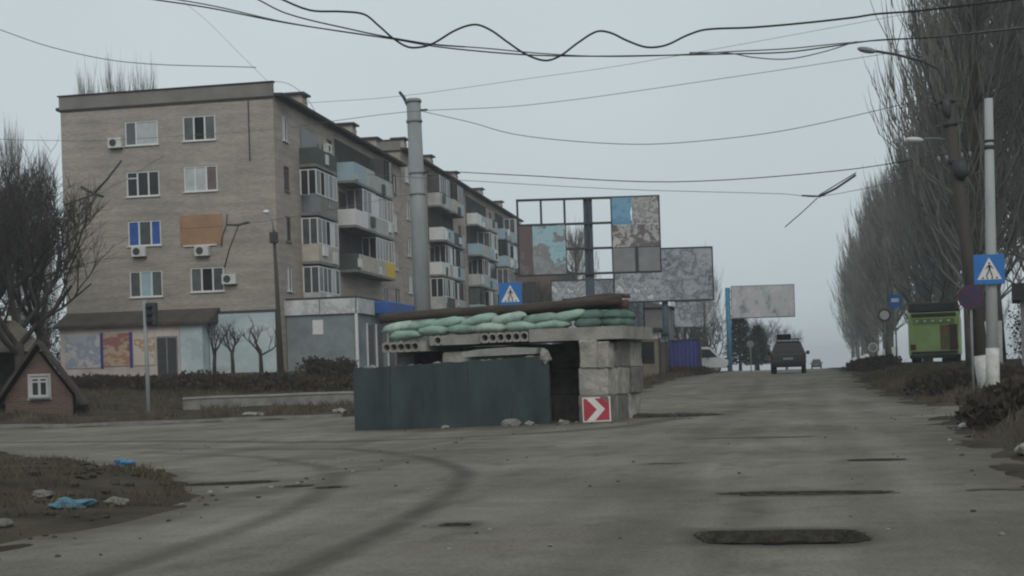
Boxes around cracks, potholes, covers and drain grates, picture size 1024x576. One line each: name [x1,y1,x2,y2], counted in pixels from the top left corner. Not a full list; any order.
pothole [694,529,871,545]
